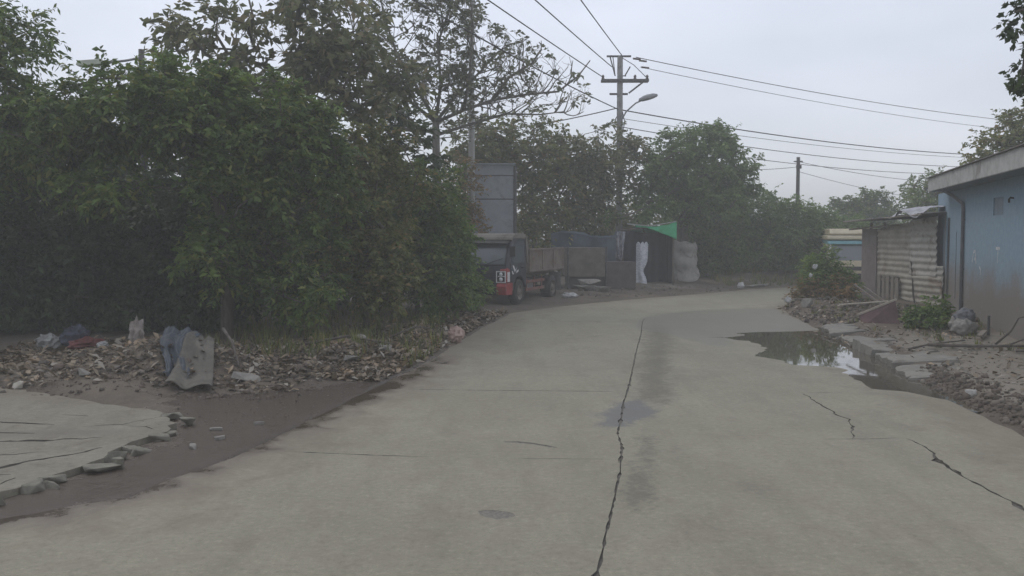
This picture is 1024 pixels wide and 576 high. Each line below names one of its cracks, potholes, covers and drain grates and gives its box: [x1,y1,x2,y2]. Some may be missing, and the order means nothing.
crack [422,321,643,576]
crack [879,438,1024,511]
crack [0,415,161,484]
crack [806,395,855,438]
